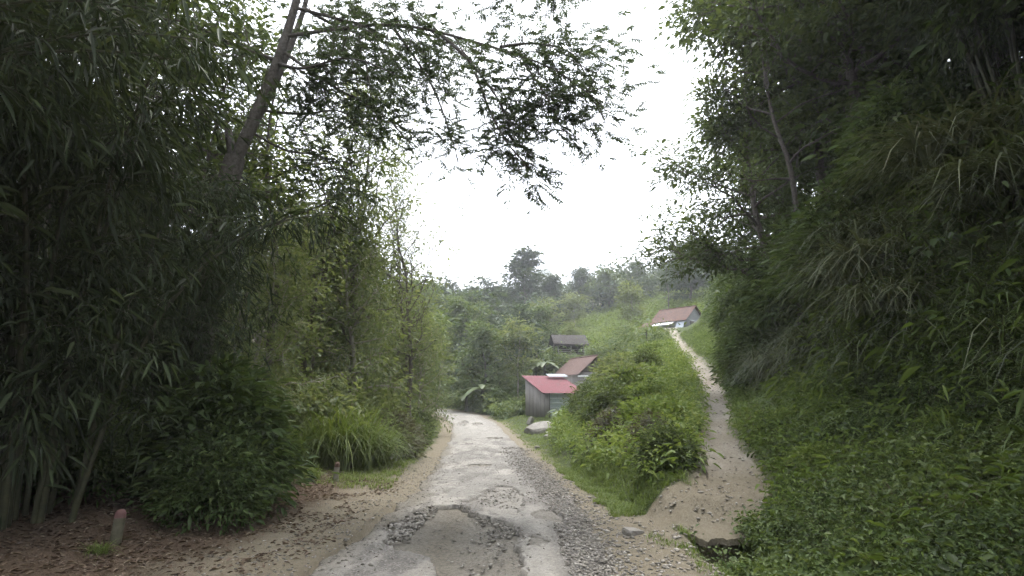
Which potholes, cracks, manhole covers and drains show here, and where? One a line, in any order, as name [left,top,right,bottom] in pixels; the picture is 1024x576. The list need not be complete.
pothole [379,504,534,576]
